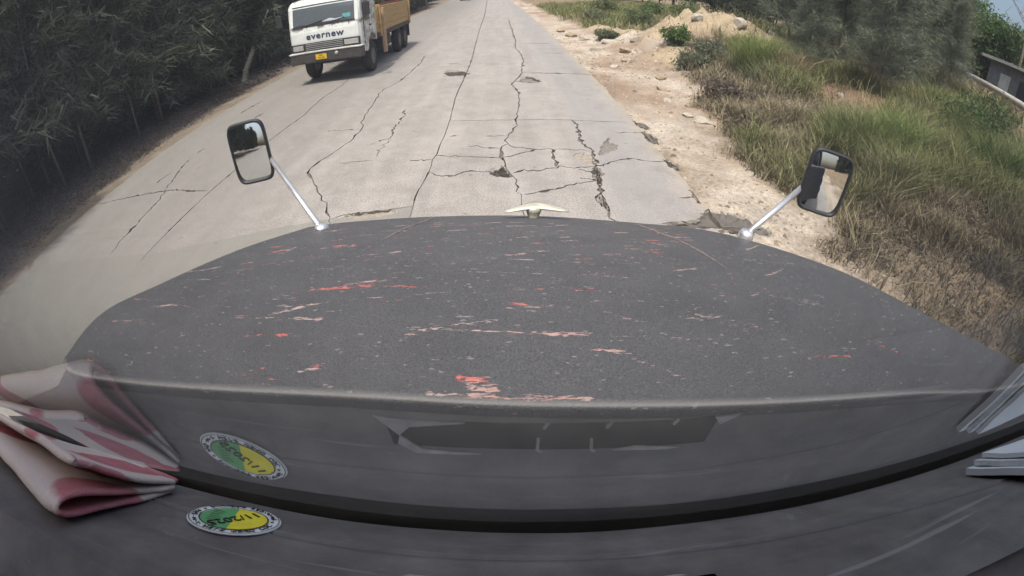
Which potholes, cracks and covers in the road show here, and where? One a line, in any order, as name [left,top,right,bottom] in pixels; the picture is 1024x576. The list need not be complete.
pothole [661,211,773,235]
pothole [597,137,618,155]
crack [307,56,425,224]
crack [410,21,672,221]
crack [94,150,205,253]
pothole [489,166,513,178]
